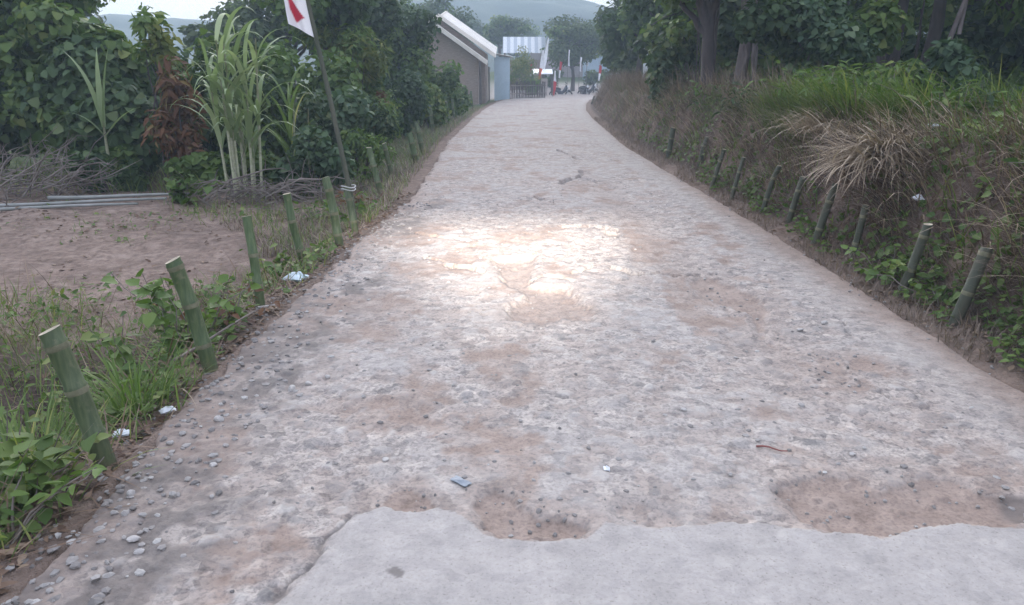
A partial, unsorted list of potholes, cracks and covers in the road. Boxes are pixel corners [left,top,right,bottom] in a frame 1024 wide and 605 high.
pothole [768,468,1024,538]
pothole [466,487,595,543]
pothole [375,485,439,513]
crack [533,149,603,205]
